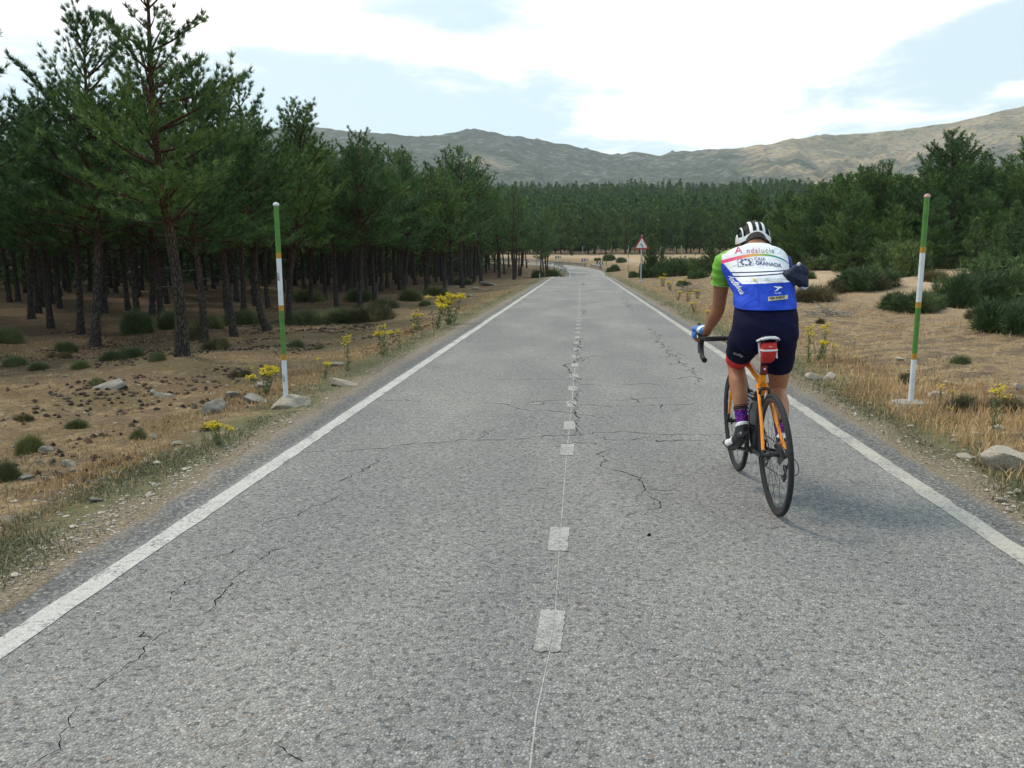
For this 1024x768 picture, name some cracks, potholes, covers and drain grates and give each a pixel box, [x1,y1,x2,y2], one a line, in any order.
crack [27,548,275,768]
crack [262,311,870,555]
